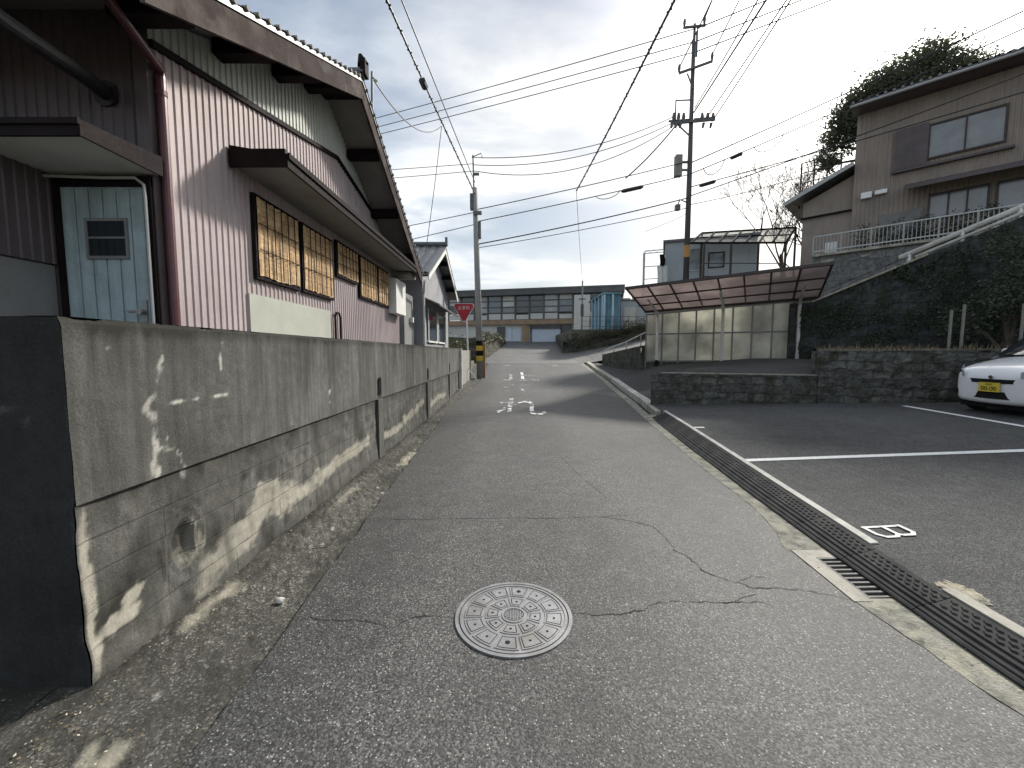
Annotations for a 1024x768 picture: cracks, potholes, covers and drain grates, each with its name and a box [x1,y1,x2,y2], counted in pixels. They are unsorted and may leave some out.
manhole cover [455,582,572,659]
crack [376,516,852,616]
crack [294,615,455,628]
drain grate [791,550,897,605]
